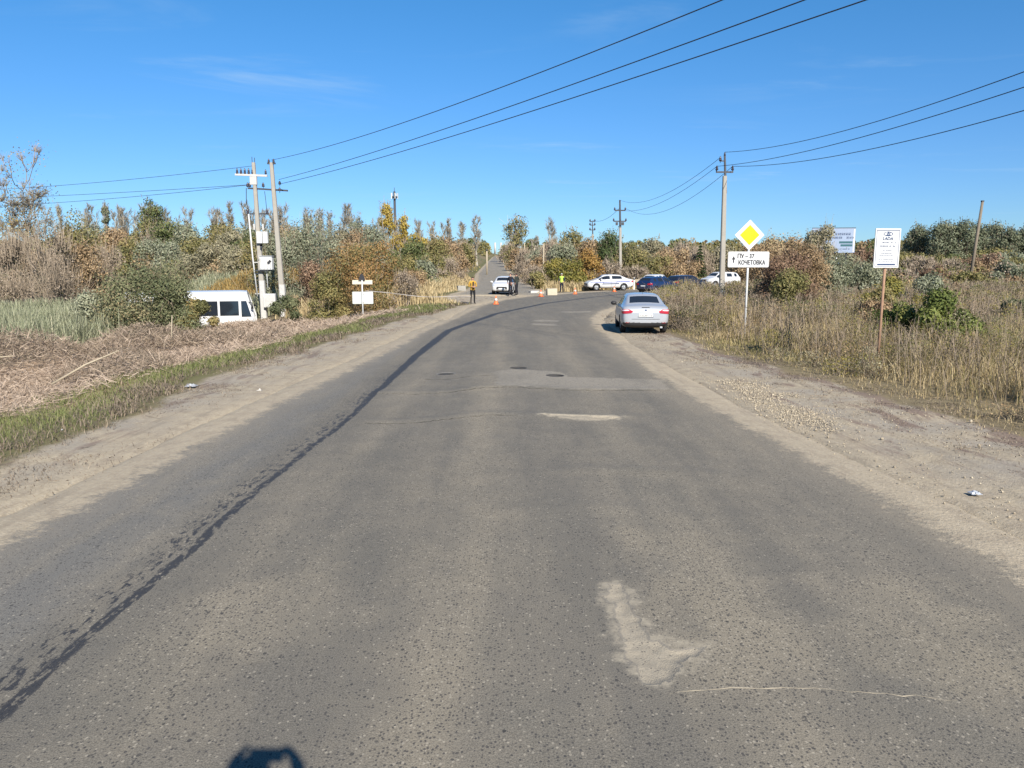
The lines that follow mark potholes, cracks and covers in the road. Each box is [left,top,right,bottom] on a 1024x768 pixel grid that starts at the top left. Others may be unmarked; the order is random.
crack [368,415,511,424]
crack [671,687,948,701]
